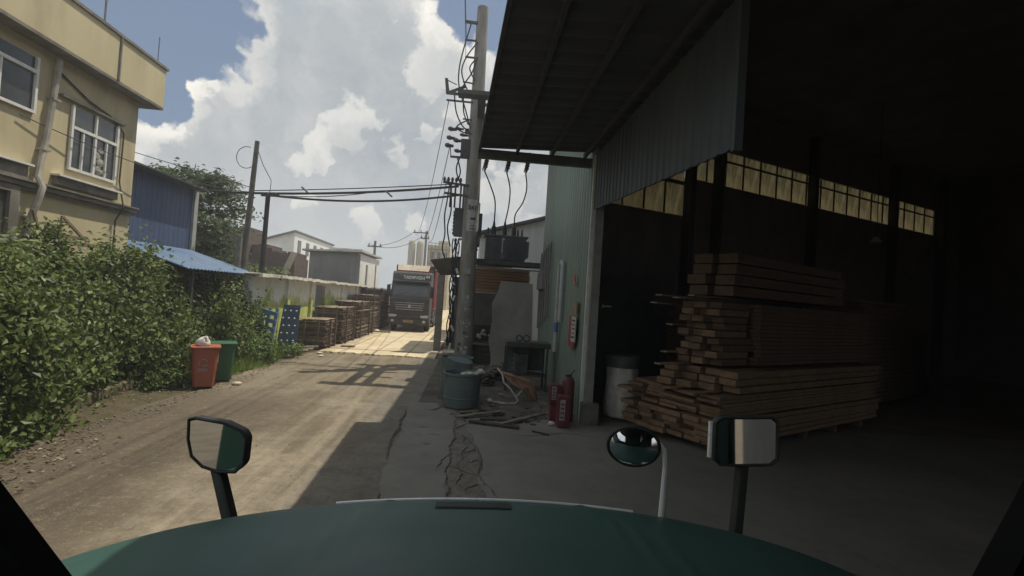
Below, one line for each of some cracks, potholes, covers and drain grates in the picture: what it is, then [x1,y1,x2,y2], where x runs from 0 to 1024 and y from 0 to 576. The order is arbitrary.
crack [386,407,595,499]
